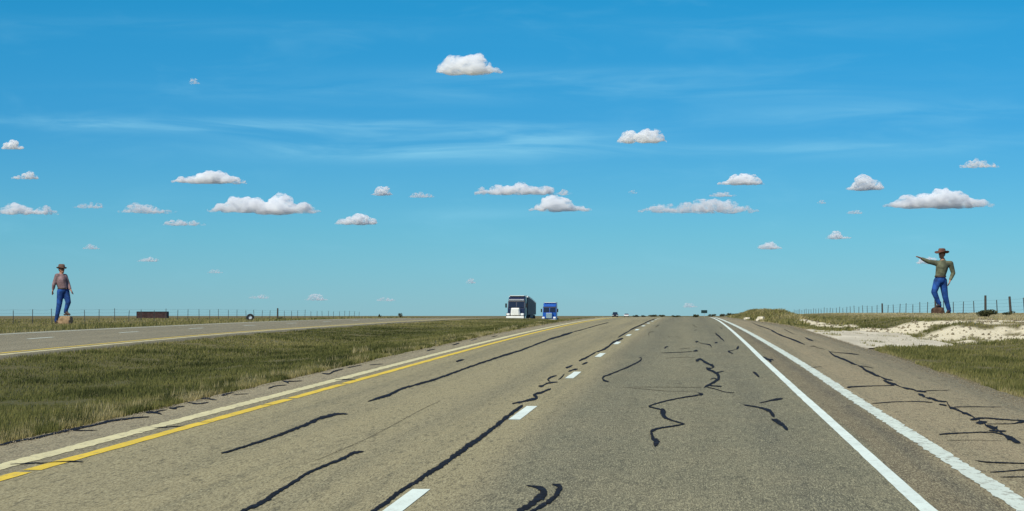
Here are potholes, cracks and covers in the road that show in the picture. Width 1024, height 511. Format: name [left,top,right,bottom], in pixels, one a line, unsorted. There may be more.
crack [648,324,739,393]
